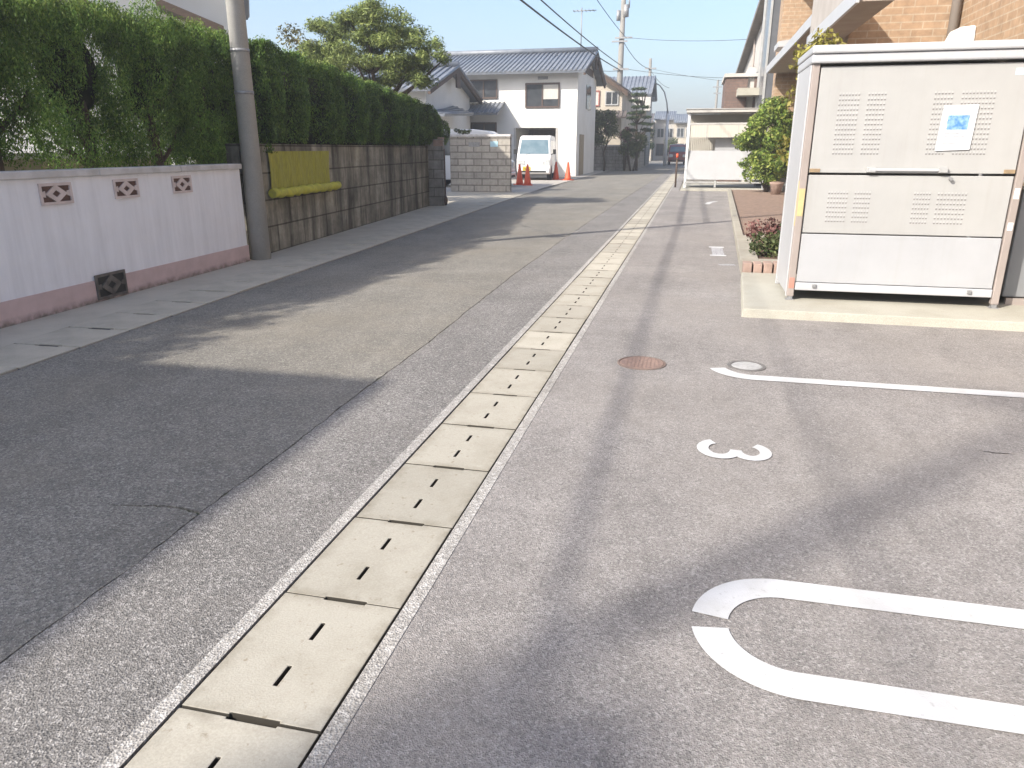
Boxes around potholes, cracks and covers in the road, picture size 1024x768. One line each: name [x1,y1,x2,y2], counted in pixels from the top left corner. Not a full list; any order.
manhole cover [727,360,766,372]
manhole cover [617,356,666,370]
